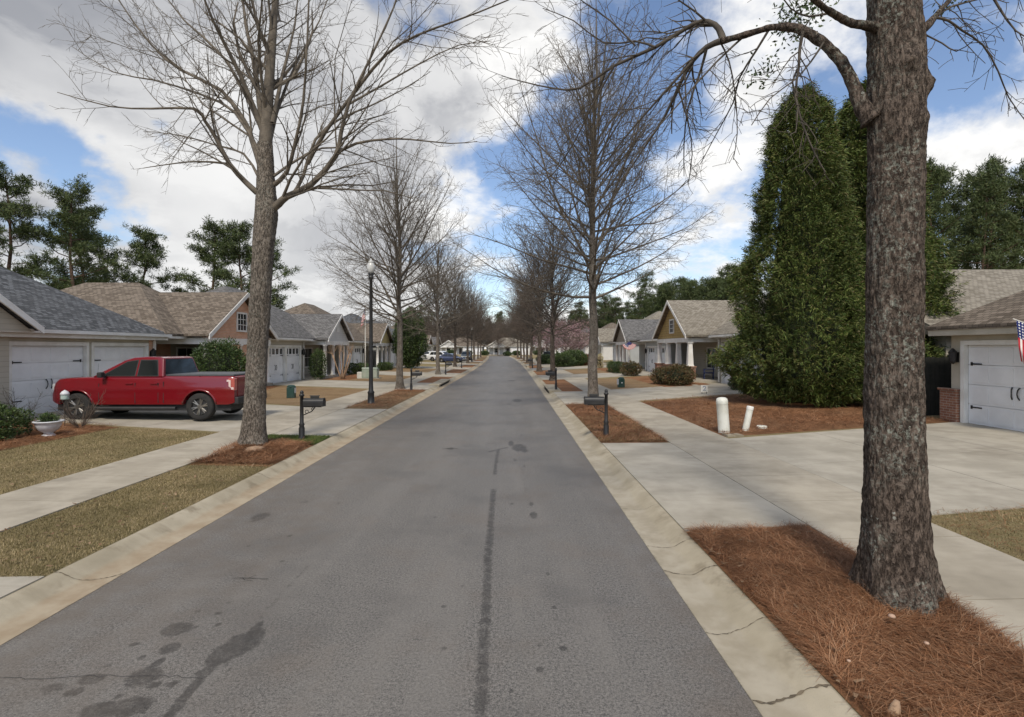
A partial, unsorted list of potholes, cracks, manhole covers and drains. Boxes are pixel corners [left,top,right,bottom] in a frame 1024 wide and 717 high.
crack [753,684,832,704]
